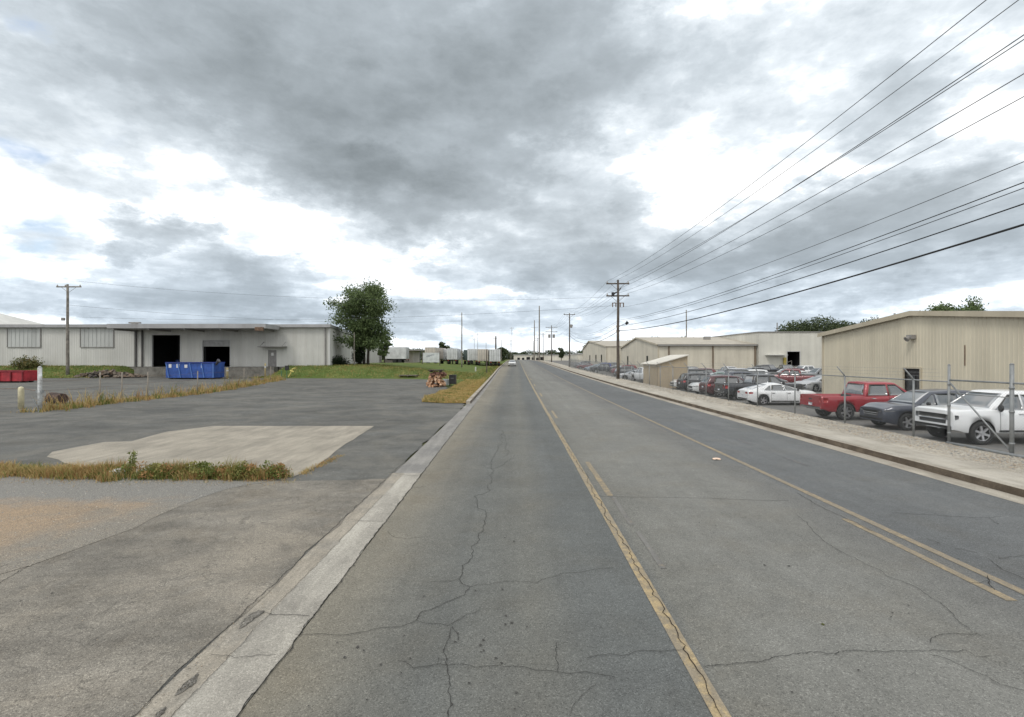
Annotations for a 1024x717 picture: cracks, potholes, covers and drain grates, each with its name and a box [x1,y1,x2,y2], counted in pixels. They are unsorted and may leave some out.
crack [299,422,1021,717]
pothole [239,610,265,629]
pothole [175,673,199,696]
